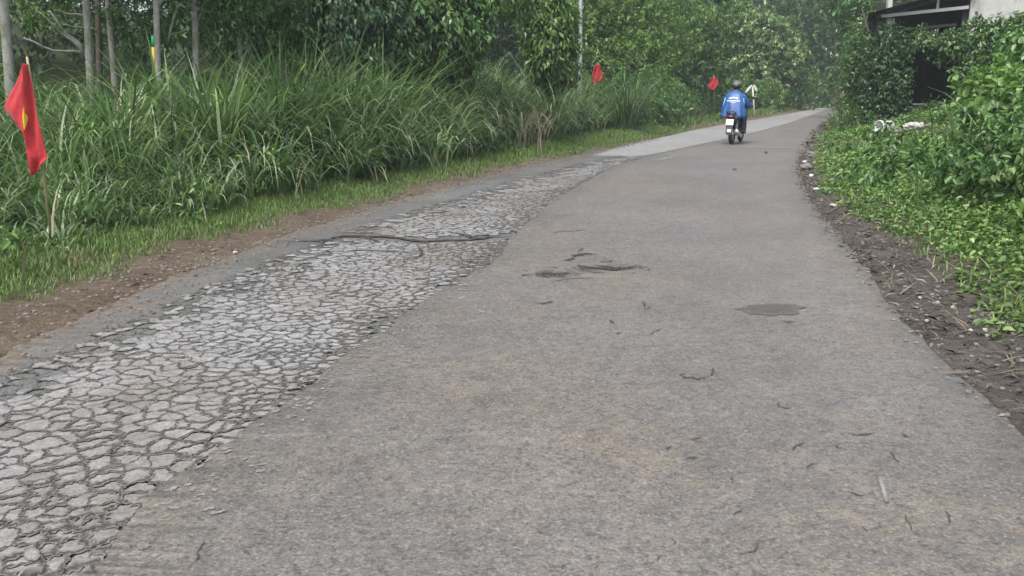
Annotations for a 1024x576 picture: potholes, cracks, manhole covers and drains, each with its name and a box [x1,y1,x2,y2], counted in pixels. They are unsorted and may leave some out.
crack [679,368,715,379]
crack [0,156,676,576]
pothole [522,270,583,278]
pothole [555,260,649,273]
